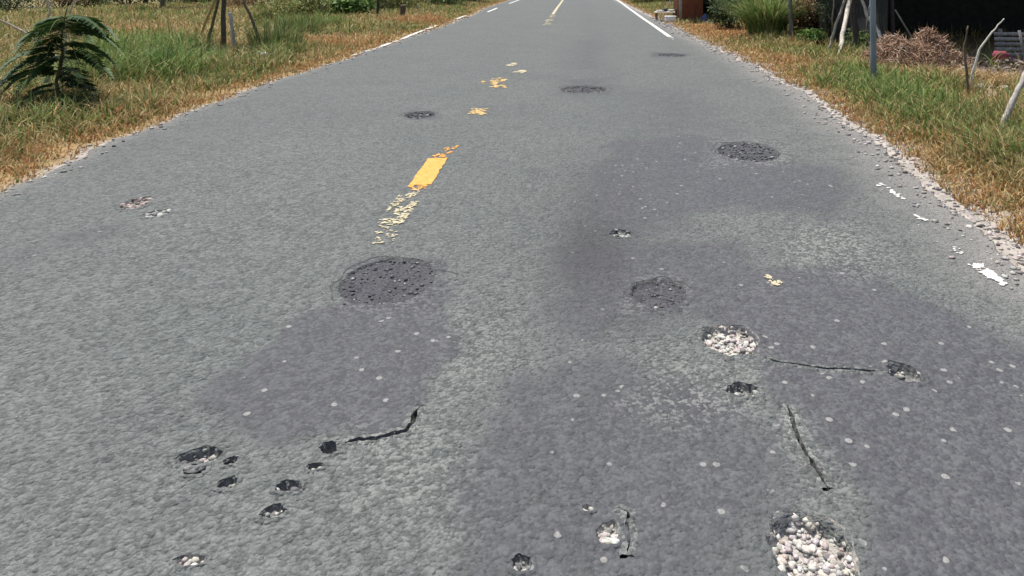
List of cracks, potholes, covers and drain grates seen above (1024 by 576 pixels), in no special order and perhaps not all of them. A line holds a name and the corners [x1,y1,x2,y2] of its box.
pothole [210,473,243,494]
pothole [177,461,212,479]
pothole [880,358,934,387]
pothole [688,321,767,361]
pothole [135,208,175,219]
pothole [218,454,243,469]
pothole [589,516,630,551]
pothole [720,379,766,400]
pothole [167,442,230,473]
pothole [269,477,307,497]
crack [781,404,835,491]
pothole [253,500,293,525]
